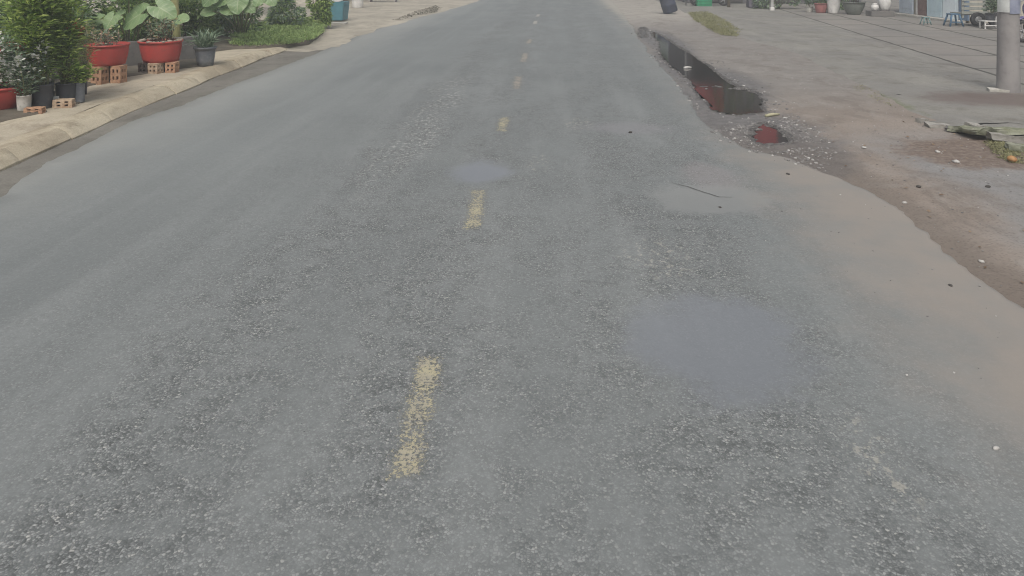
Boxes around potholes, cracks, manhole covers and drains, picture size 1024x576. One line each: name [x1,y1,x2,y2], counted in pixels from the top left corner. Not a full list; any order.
pothole [637,27,649,38]
pothole [650,31,768,116]
pothole [745,121,794,146]
